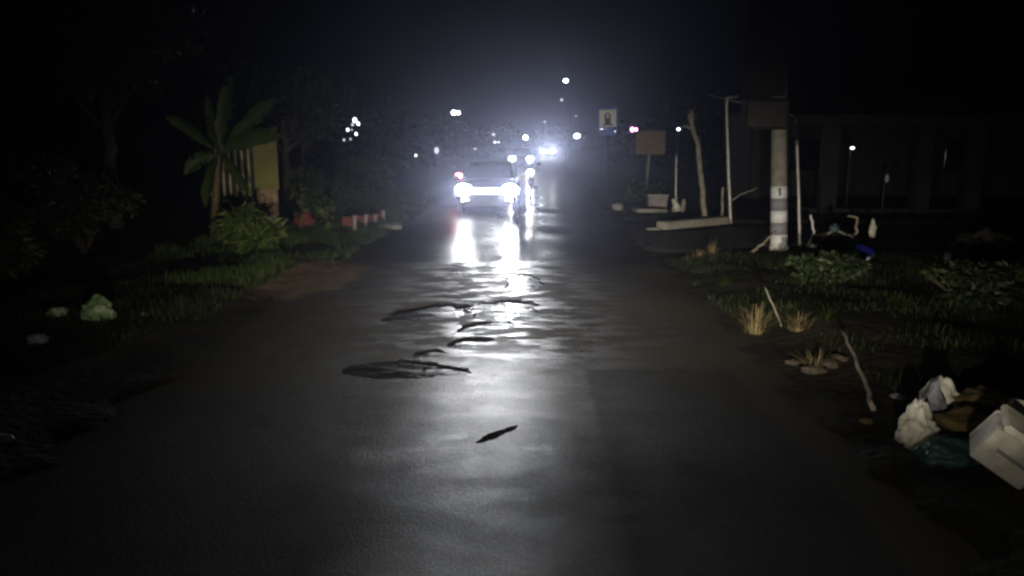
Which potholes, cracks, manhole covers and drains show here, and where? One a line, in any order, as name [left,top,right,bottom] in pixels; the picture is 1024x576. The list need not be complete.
pothole [342,359,471,380]
pothole [475,425,518,443]
pothole [413,348,443,356]
pothole [457,321,514,333]
pothole [447,336,494,349]
pothole [381,302,474,322]
